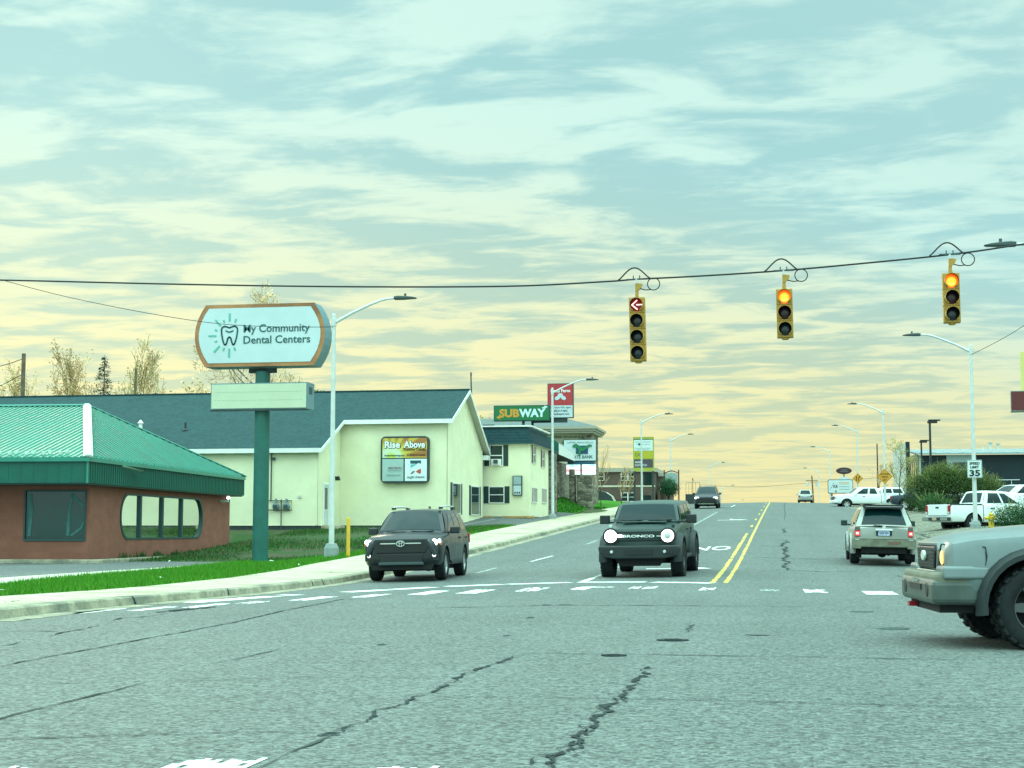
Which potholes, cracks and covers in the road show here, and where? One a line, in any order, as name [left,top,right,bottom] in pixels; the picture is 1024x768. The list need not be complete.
crack [766,504,855,572]
crack [0,653,1024,768]
crack [0,599,341,666]
